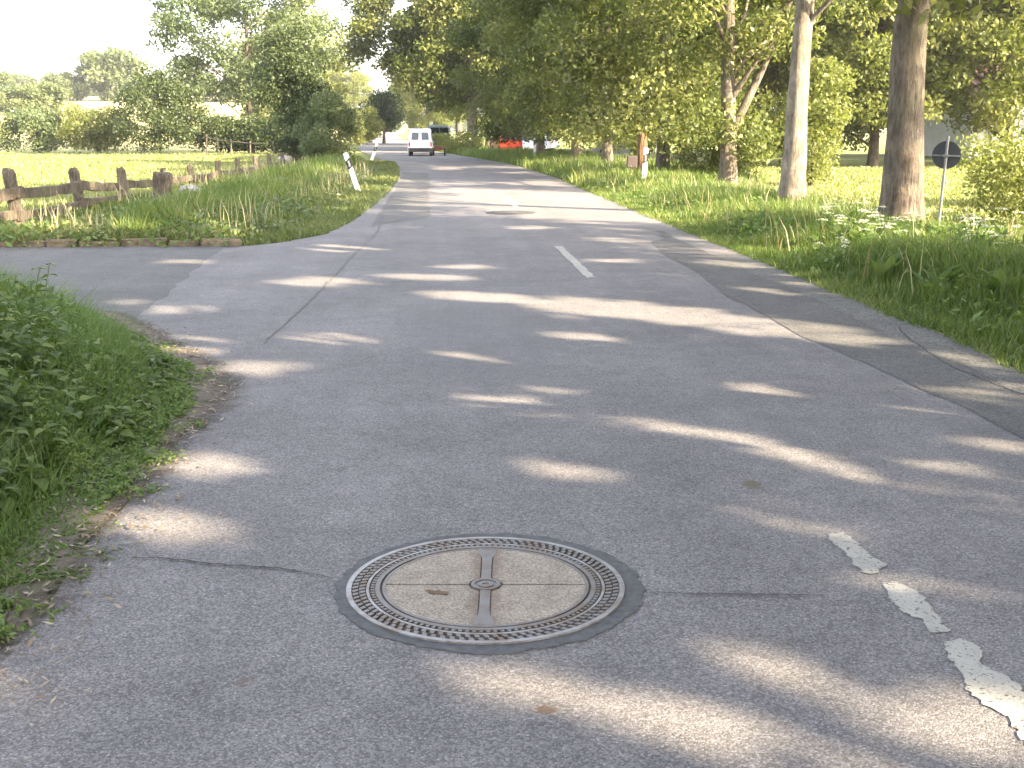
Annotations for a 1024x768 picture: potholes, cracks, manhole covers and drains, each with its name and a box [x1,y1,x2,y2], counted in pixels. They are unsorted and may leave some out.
crack [131,557,333,578]
manhole cover [333,533,646,655]
